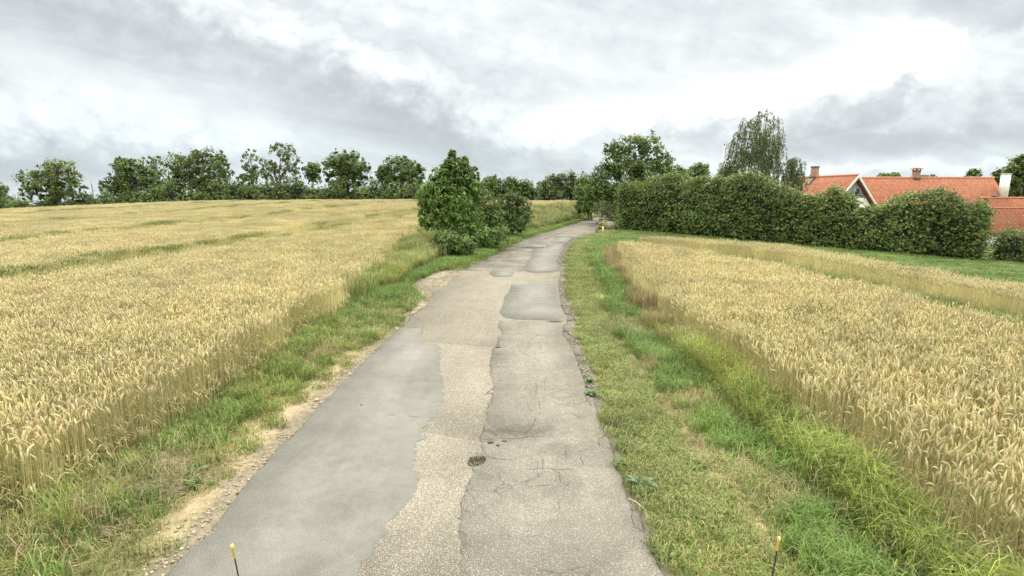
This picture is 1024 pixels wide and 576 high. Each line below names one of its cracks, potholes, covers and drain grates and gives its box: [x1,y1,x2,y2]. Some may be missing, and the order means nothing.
crack [478,378,546,460]
crack [503,434,605,507]
pothole [467,456,487,467]
